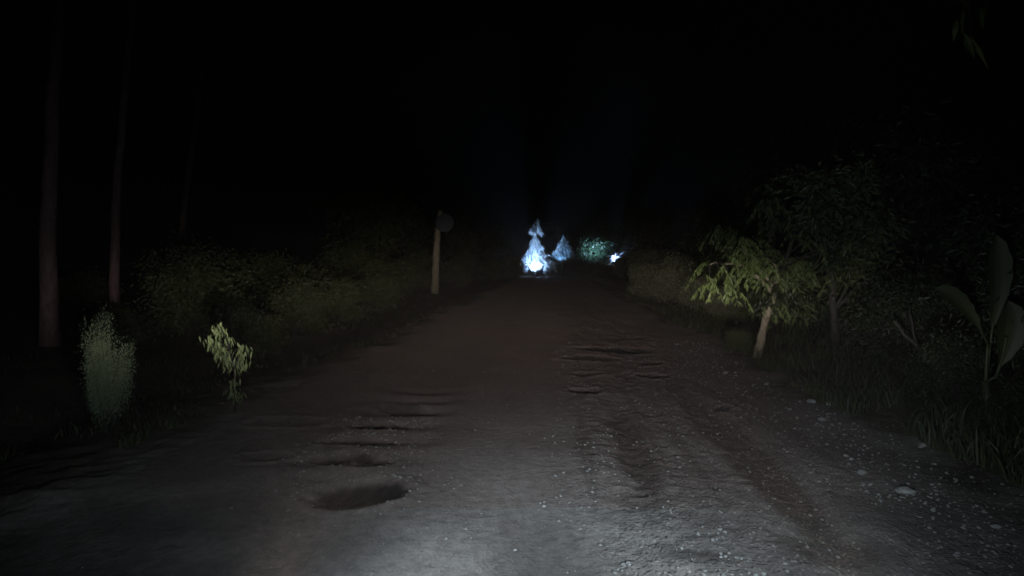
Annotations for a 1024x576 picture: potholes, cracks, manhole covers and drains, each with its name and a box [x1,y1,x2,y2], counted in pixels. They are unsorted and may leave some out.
pothole [352,420,417,430]
pothole [558,354,622,362]
pothole [296,476,414,511]
pothole [568,346,661,354]
pothole [562,386,608,394]
pothole [309,449,394,467]
pothole [633,371,670,379]
